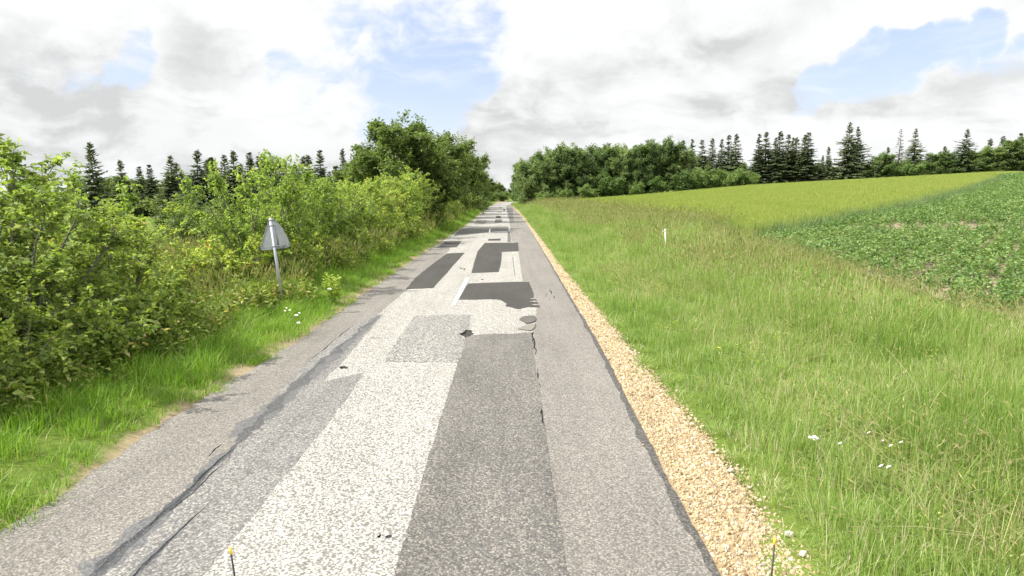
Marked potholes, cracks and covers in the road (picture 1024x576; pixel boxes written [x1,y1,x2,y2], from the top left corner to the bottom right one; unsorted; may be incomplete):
crack [89,444,235,576]
crack [531,332,544,424]
